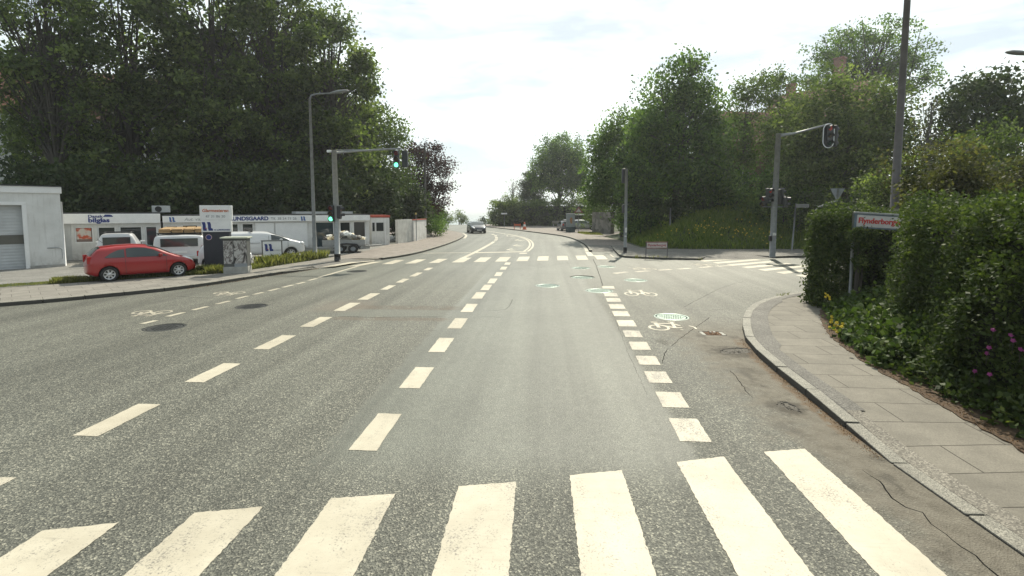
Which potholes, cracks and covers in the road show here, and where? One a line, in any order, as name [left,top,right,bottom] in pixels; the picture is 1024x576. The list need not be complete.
pothole [776,401,801,413]
manhole cover [142,323,187,332]
crack [864,471,999,576]
